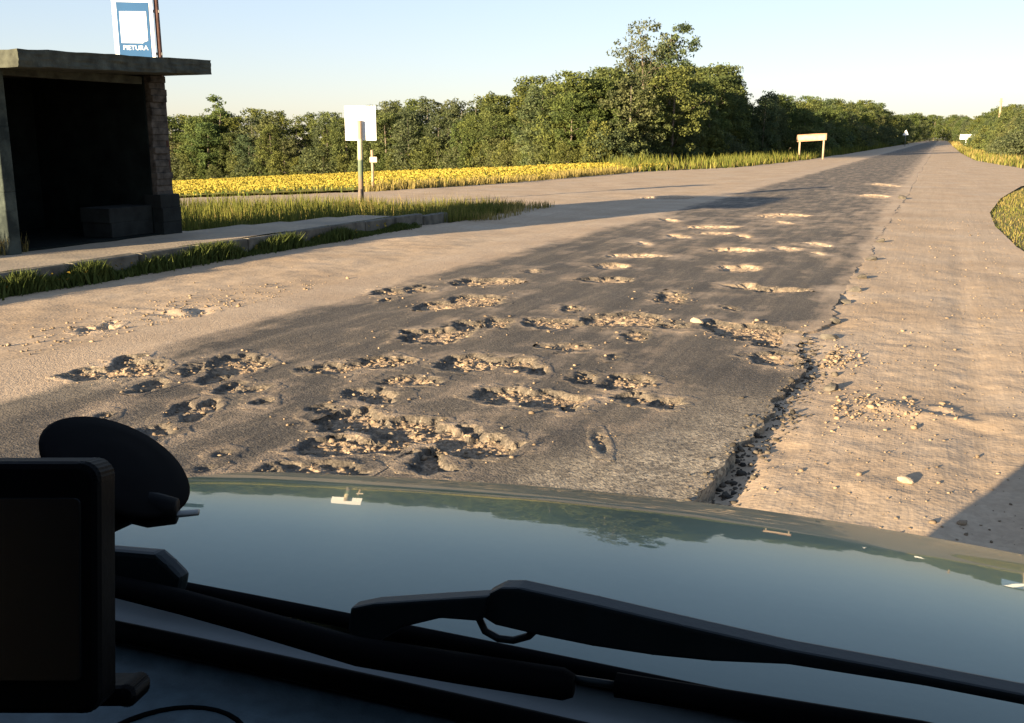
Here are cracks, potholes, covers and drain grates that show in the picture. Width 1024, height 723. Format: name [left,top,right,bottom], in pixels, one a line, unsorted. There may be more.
pothole [694,317,815,352]
pothole [601,388,700,412]
pothole [247,457,390,476]
pothole [517,310,678,331]
pothole [443,277,527,288]
pothole [145,394,232,426]
pothole [586,425,617,461]
pothole [298,402,542,471]
pothole [422,352,558,382]
pothole [557,369,674,393]
